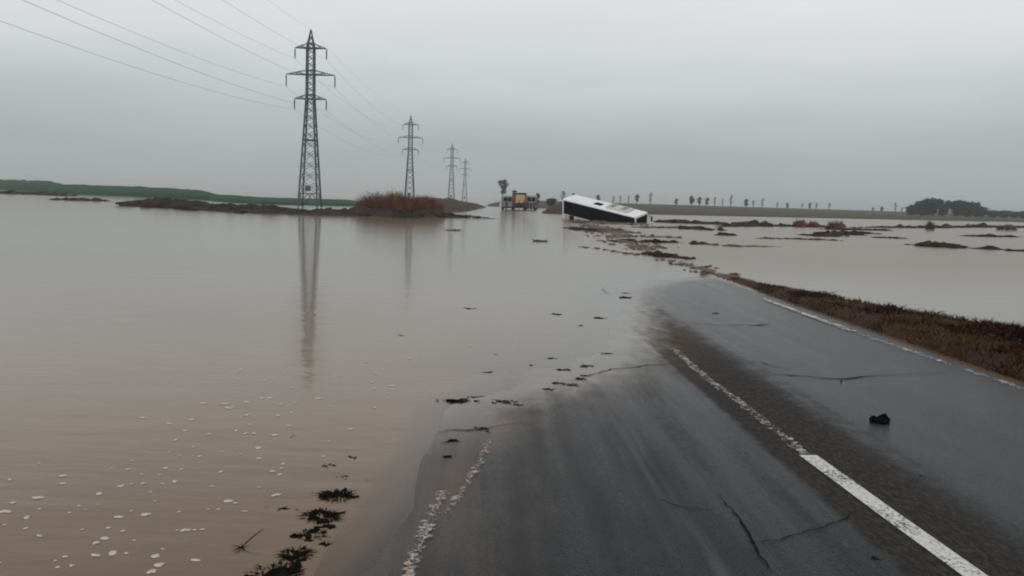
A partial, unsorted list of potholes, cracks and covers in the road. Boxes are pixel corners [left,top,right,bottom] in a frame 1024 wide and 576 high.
crack [659,494,856,570]
crack [744,362,946,383]
